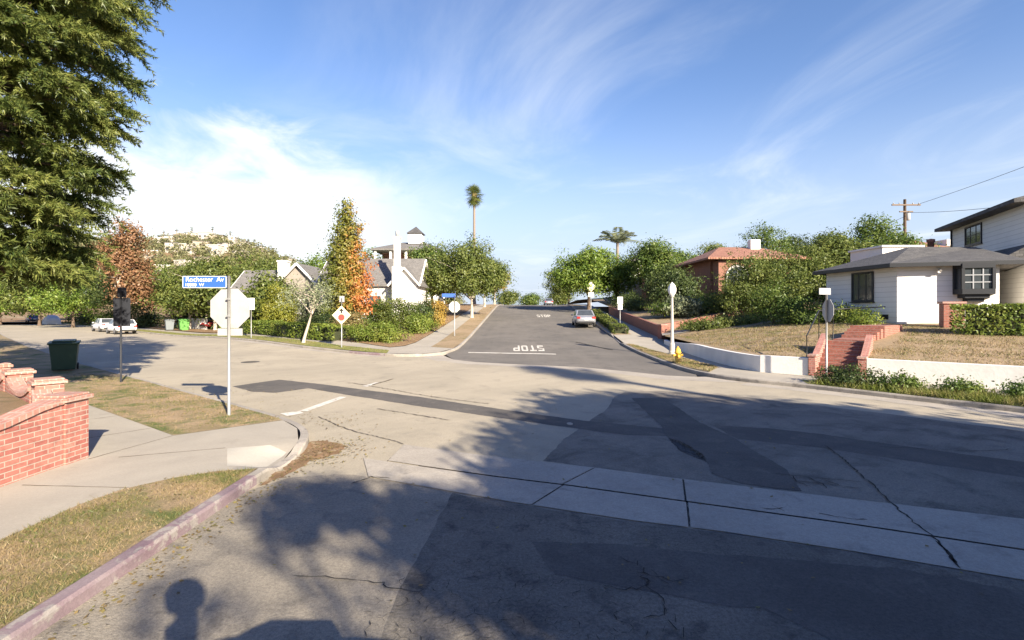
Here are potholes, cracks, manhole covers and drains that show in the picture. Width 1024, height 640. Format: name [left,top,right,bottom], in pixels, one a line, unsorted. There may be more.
crack [604,557,684,637]
pothole [669,438,706,460]
crack [775,445,960,568]
crack [293,575,418,592]
